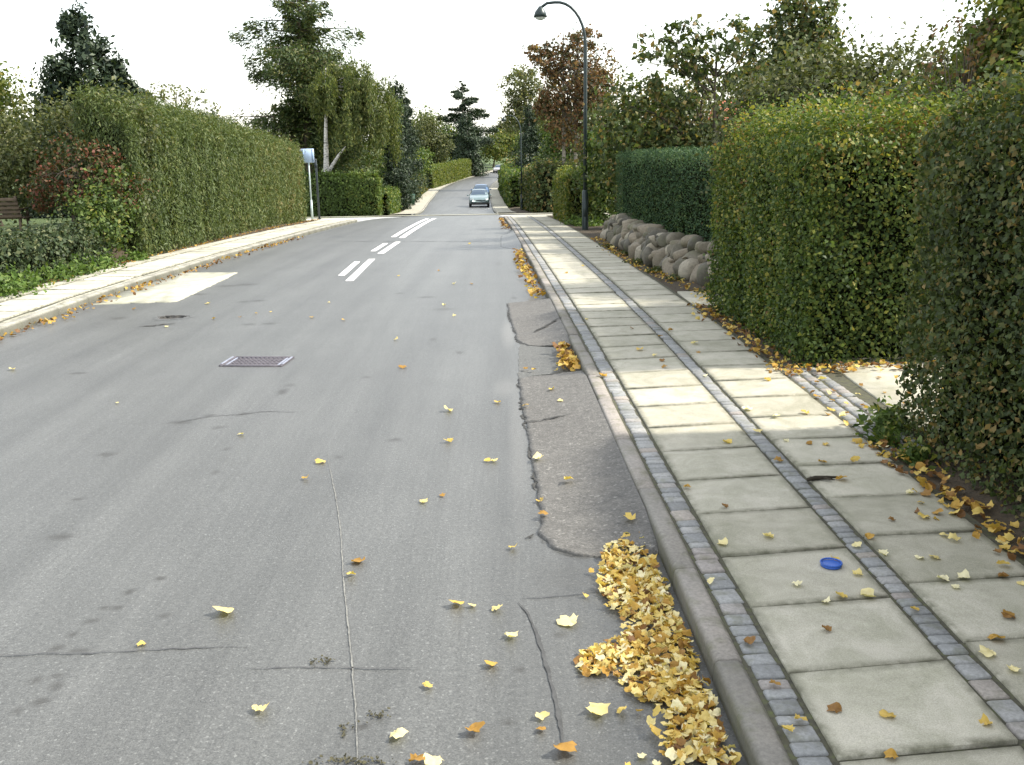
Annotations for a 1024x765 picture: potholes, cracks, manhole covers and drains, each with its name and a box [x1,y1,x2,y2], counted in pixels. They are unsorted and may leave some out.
crack [507,305,560,344]
crack [162,411,302,423]
crack [518,591,594,743]
crack [245,457,414,765]
crack [516,372,596,557]
